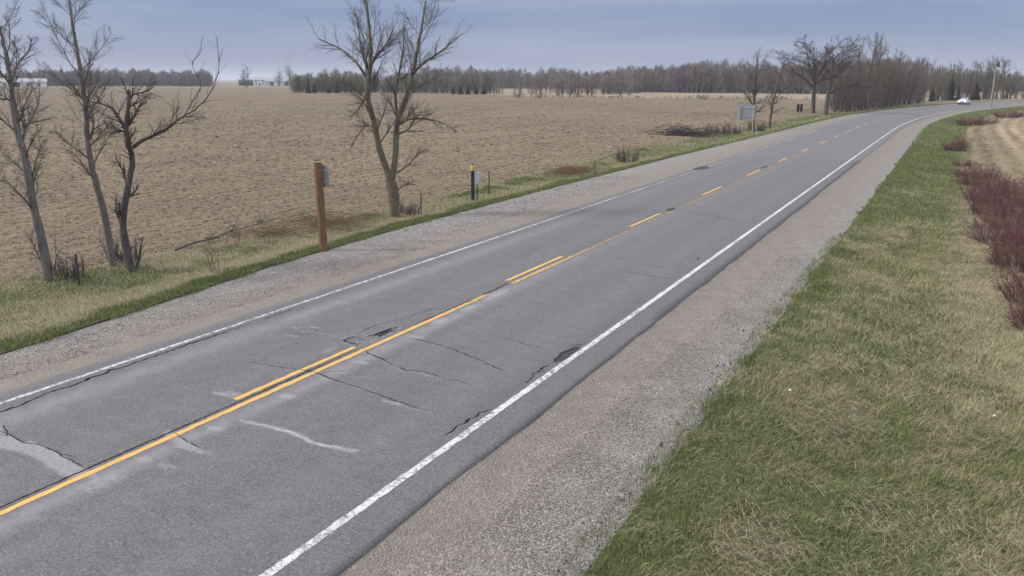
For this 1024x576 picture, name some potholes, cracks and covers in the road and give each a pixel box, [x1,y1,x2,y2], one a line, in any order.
pothole [342,327,400,346]
crack [250,362,443,415]
crack [287,307,504,371]
crack [366,351,471,385]
crack [0,309,293,469]
pothole [554,347,579,362]
crack [444,408,492,436]
